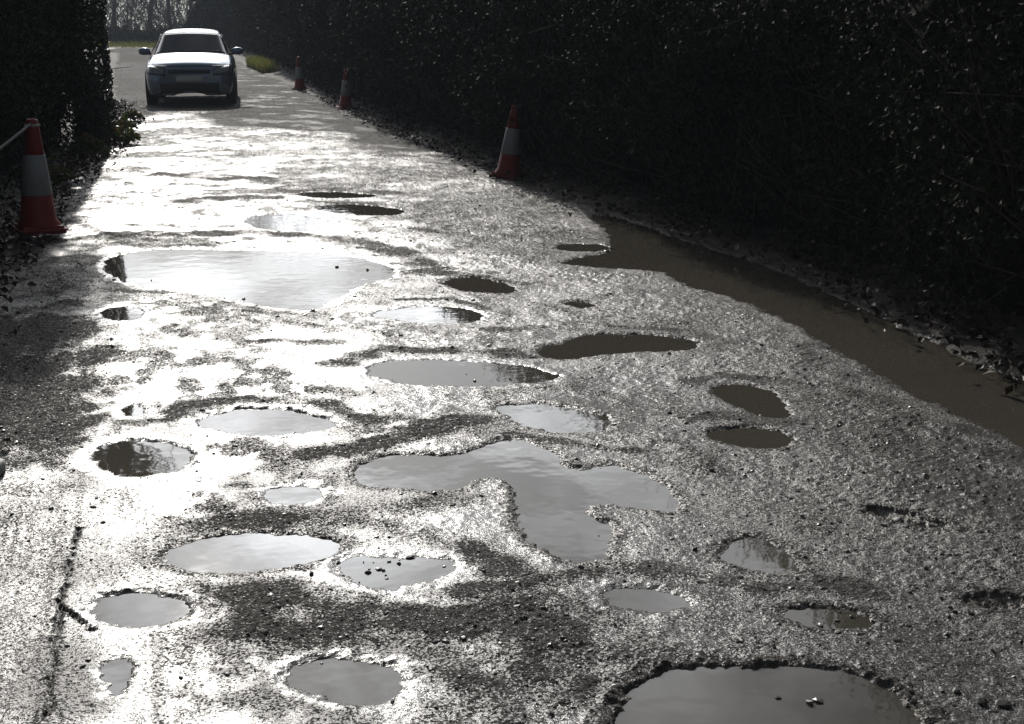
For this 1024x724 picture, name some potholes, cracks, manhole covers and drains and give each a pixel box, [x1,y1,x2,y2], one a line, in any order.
pothole [83,435,200,478]
pothole [705,382,799,420]
pothole [363,357,567,388]
pothole [706,532,811,578]
pothole [529,331,710,361]
pothole [435,275,523,294]
pothole [189,404,343,438]
pothole [700,422,804,450]
pothole [597,656,938,724]
crack [37,526,100,718]
pothole [153,526,354,576]
pothole [771,599,886,635]
